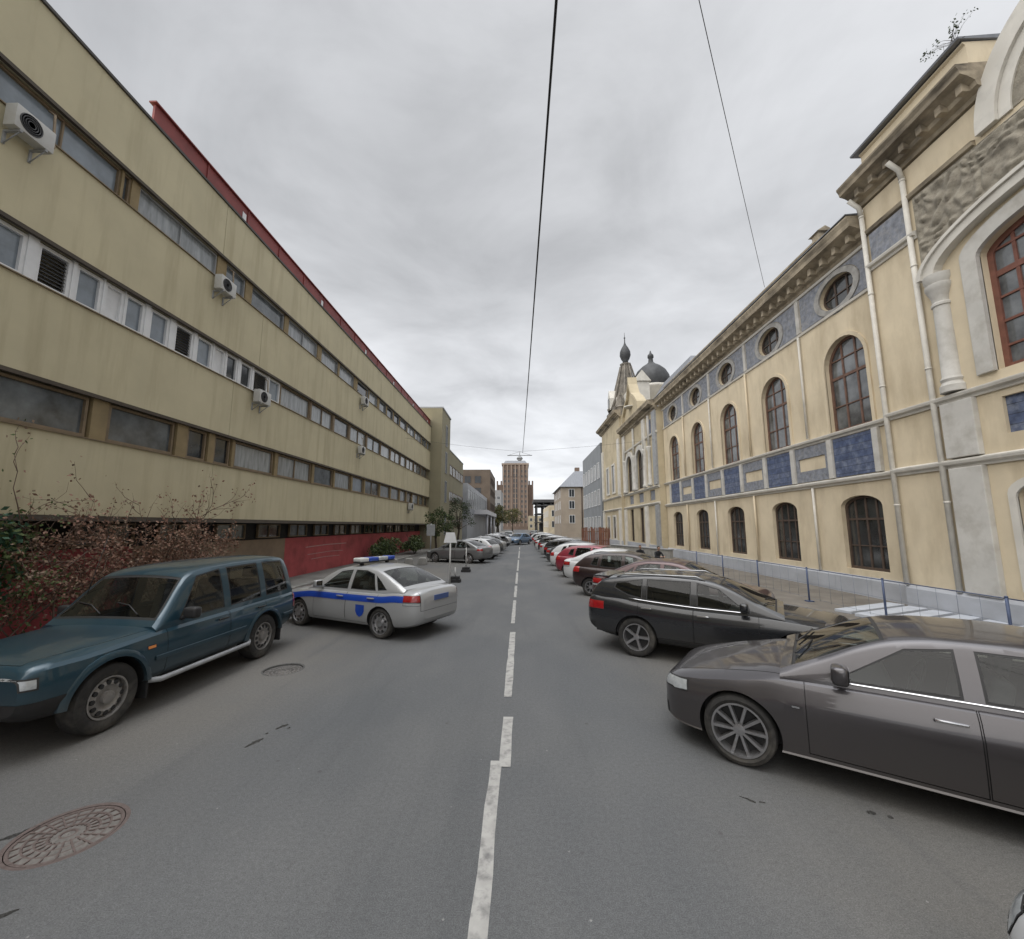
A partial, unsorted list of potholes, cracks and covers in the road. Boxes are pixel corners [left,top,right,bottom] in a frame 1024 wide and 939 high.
manhole cover [261,663,305,676]
crack [245,724,290,748]
manhole cover [0,802,131,871]
